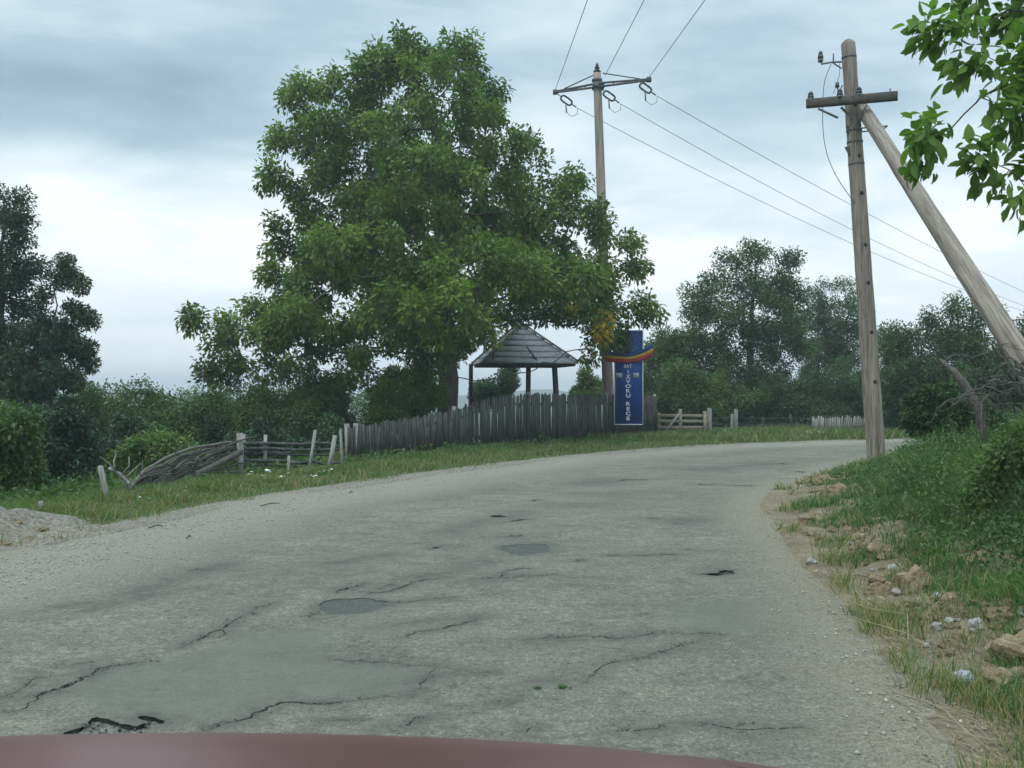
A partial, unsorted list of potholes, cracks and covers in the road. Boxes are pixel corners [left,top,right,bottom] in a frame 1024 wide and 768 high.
crack [389,618,483,638]
crack [179,603,272,650]
crack [521,630,729,684]
crack [332,577,454,603]
crack [200,657,499,732]
pothole [64,716,165,734]
crack [0,658,160,714]
crack [616,720,668,734]
